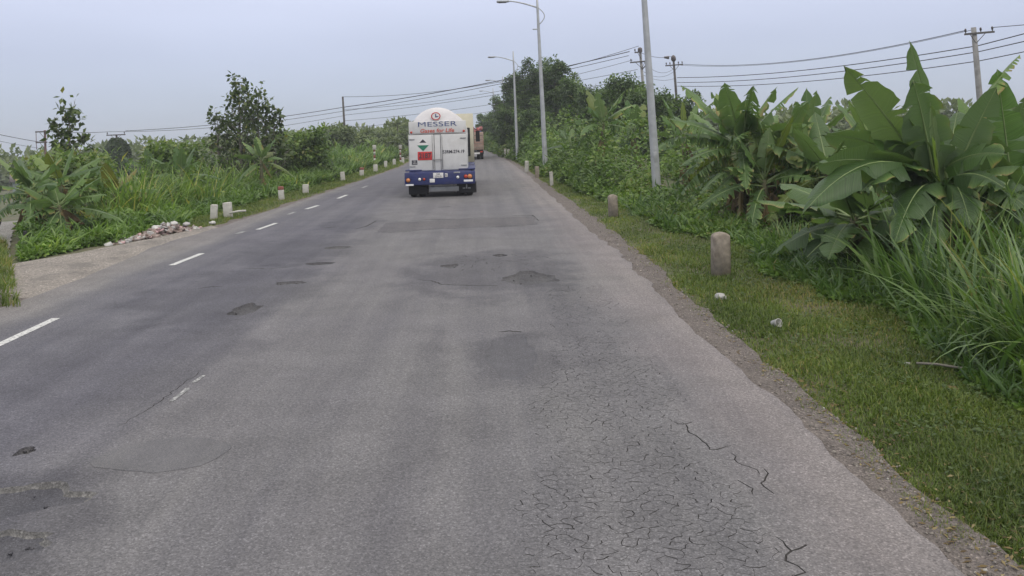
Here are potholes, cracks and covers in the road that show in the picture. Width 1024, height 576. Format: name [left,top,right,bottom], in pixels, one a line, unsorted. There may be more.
pothole [0,529,54,563]
pothole [0,481,98,520]
pothole [12,446,36,456]
pothole [501,271,560,285]
pothole [227,303,263,316]
crack [514,331,793,576]
